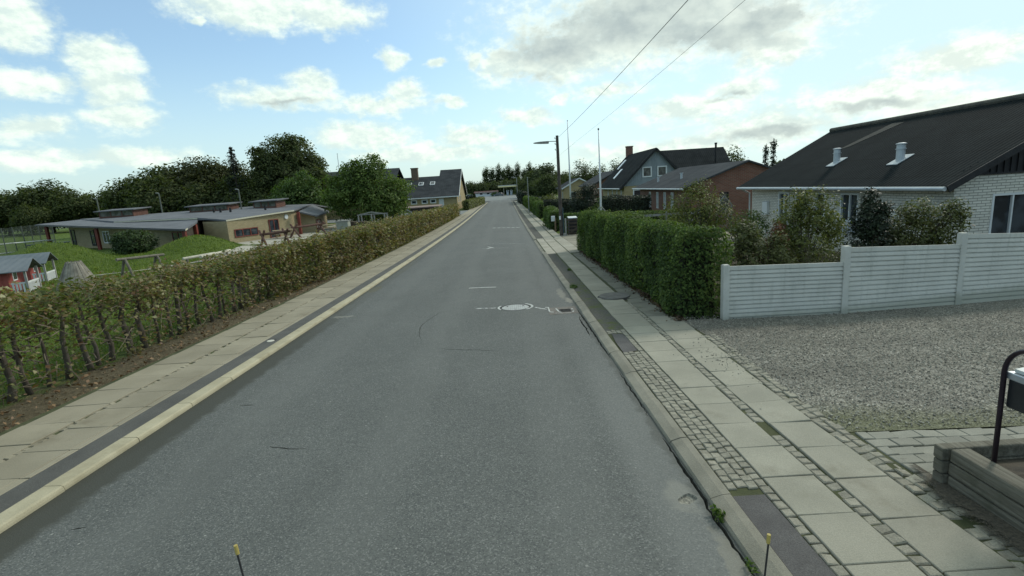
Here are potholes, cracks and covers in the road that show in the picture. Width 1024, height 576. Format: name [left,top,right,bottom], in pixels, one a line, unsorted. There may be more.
manhole cover [597,292,631,300]
crack [577,309,648,416]
drain grate [547,306,579,315]
pothole [678,493,697,504]
